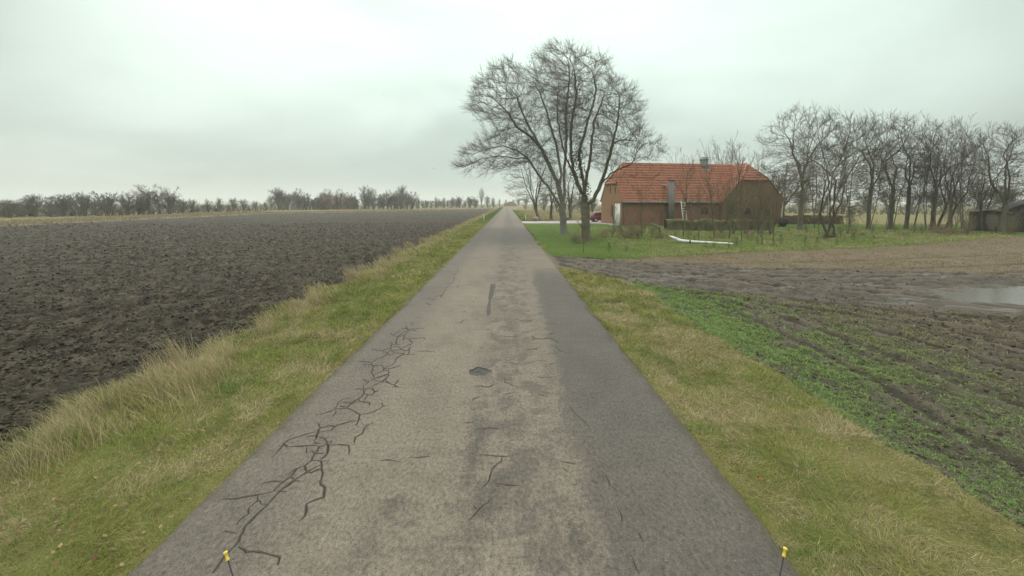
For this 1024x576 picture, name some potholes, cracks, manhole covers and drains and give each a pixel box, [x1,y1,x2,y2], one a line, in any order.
crack [469,454,520,521]
crack [464,319,567,430]
crack [211,264,477,574]
pothole [469,367,492,376]
